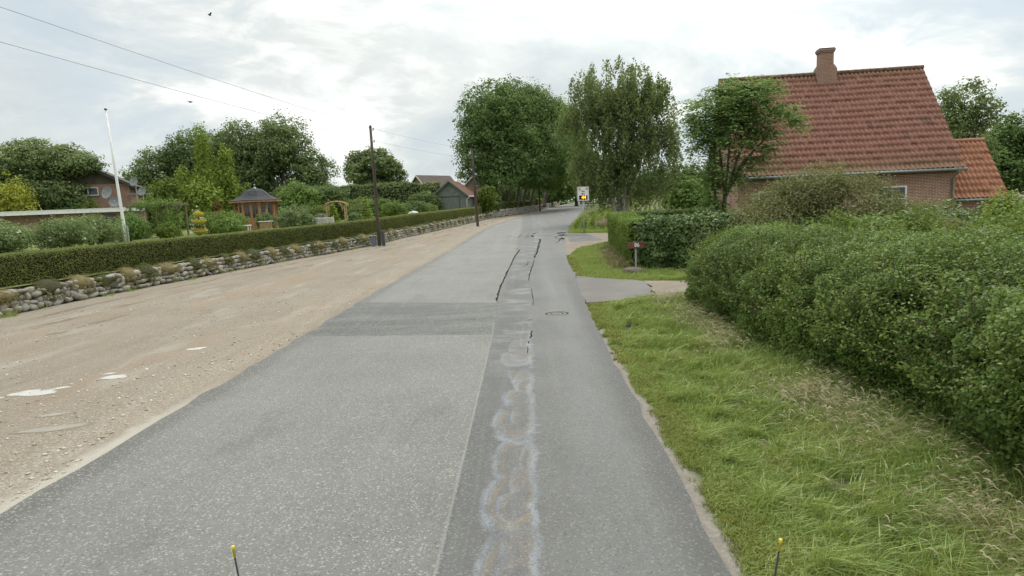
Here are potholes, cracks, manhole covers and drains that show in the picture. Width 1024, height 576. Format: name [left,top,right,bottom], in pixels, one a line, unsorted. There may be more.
crack [496,233,562,354]
